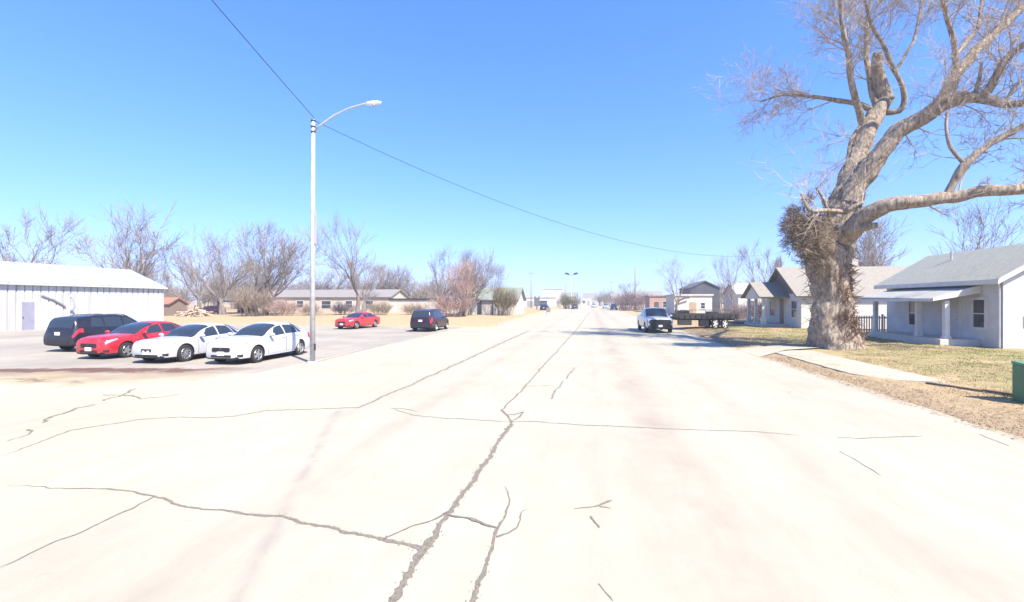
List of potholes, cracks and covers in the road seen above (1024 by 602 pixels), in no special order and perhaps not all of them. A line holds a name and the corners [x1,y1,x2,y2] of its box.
crack [840,435,915,475]
crack [1,313,803,602]
